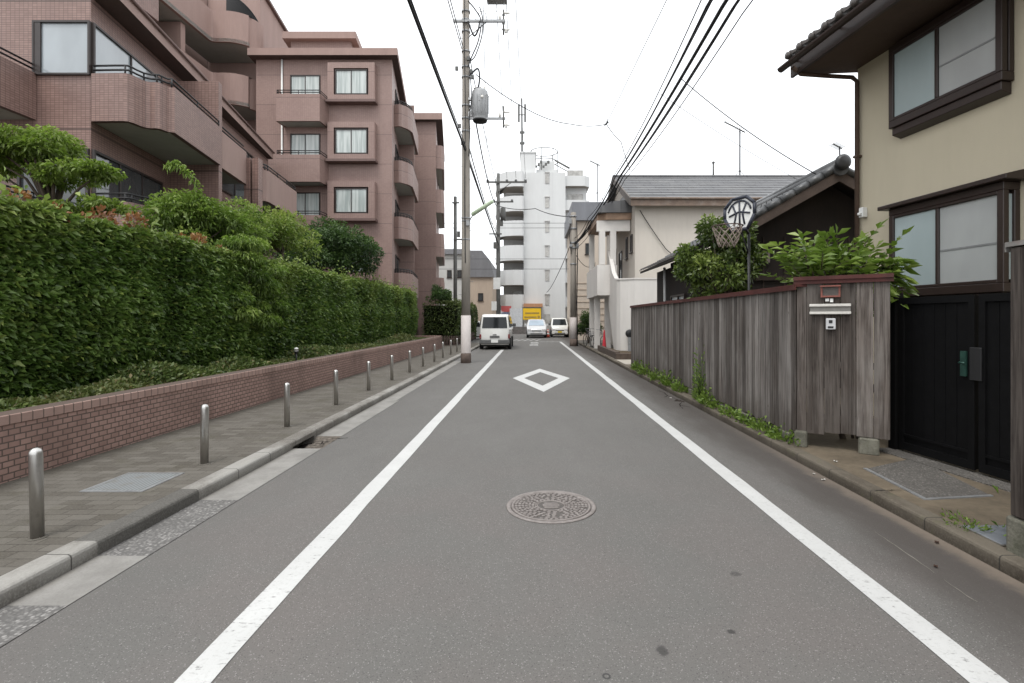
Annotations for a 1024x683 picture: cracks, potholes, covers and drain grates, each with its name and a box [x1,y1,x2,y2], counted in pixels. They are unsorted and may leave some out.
manhole cover [506,490,596,524]
crack [877,533,978,602]
